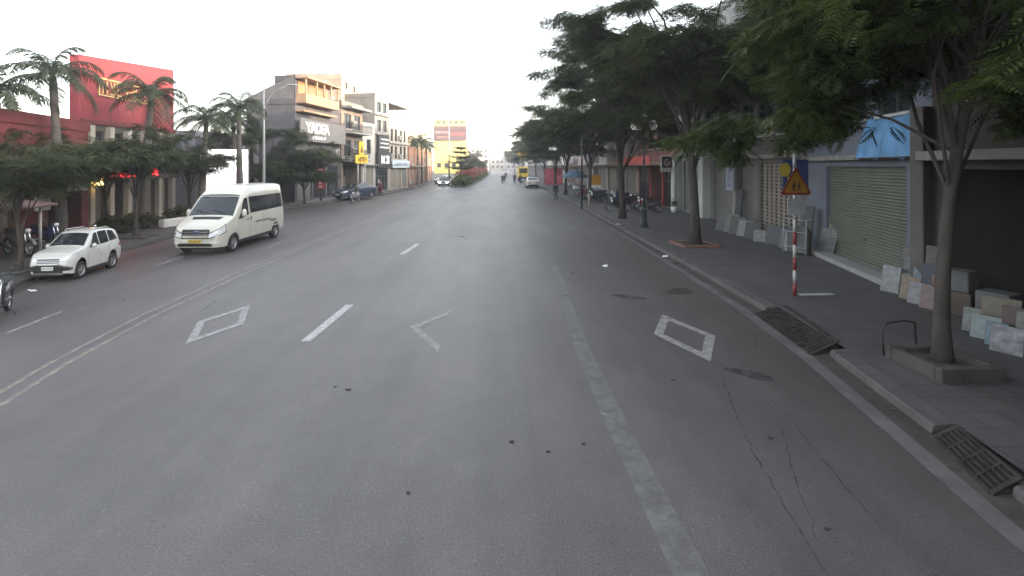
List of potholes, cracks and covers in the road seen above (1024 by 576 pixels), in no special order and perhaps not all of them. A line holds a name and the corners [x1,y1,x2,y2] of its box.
drain grate [754,305,840,356]
crack [723,371,869,557]
drain grate [933,424,1023,496]
